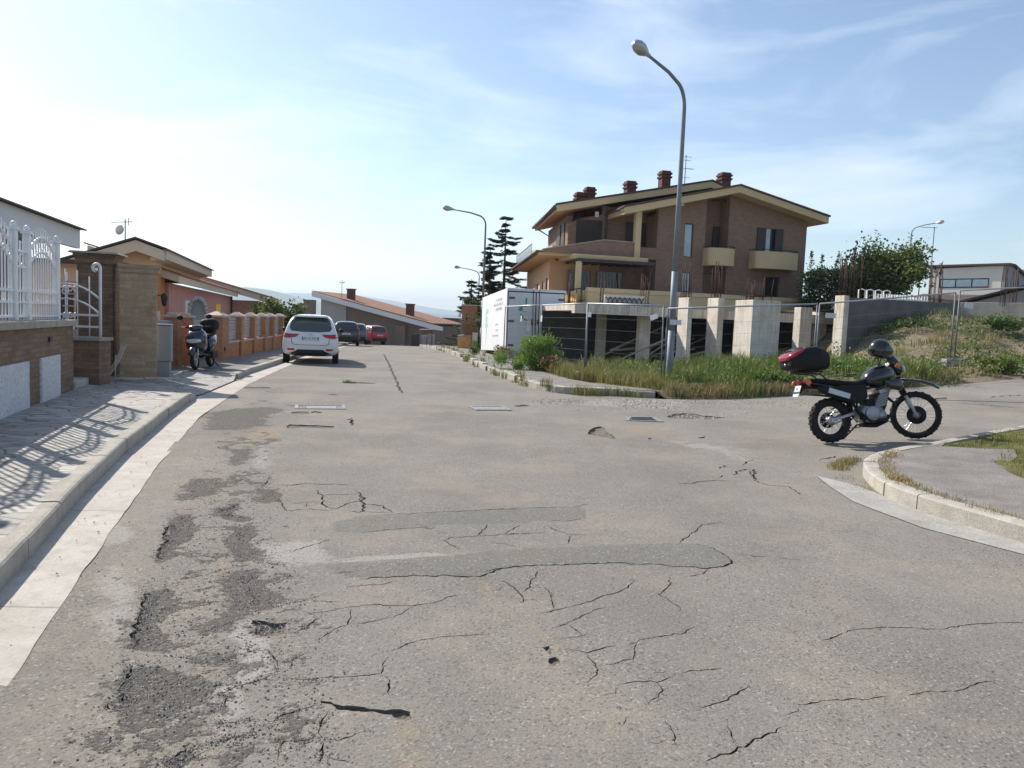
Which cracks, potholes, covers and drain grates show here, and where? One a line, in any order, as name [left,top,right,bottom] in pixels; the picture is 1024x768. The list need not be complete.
crack [333,544,795,744]
crack [694,681,993,763]
crack [264,477,598,548]
crack [681,460,801,495]
pothole [252,620,288,636]
crack [284,593,458,657]
crack [165,634,484,766]
pothole [588,427,616,439]
crack [824,622,1022,640]
